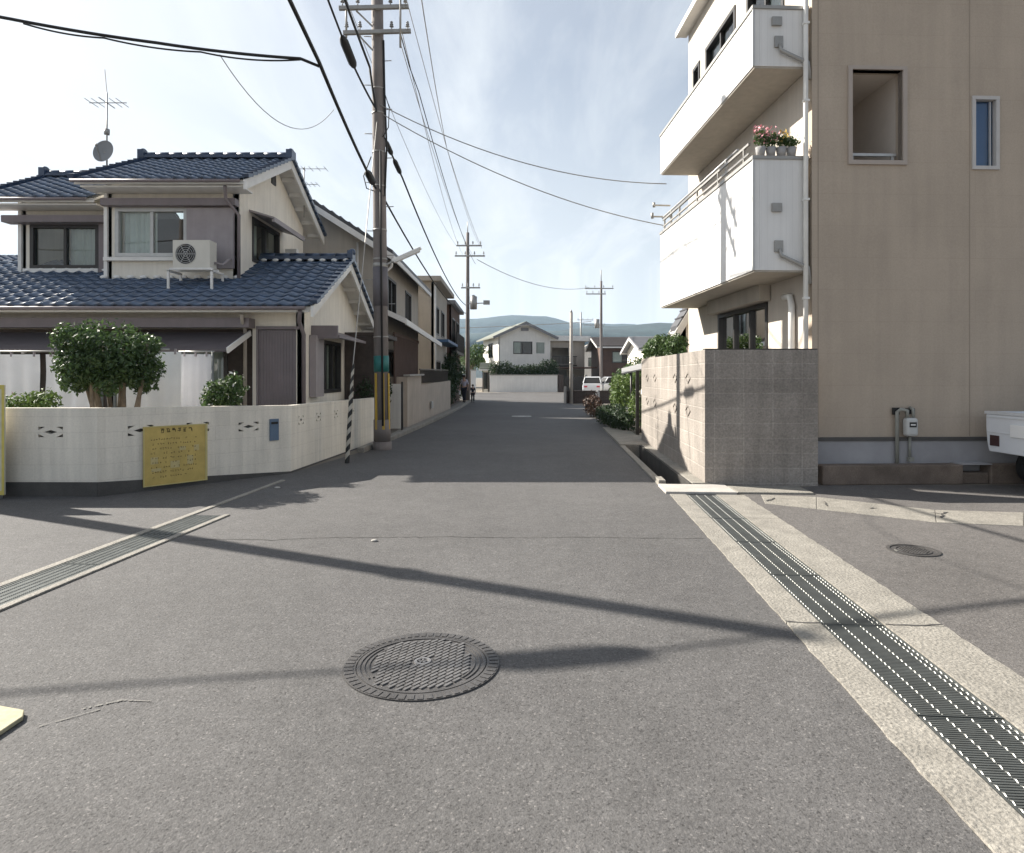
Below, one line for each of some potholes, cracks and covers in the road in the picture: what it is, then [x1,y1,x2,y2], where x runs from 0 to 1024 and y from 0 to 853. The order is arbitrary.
drain grate [919,716,1024,818]
drain grate [711,518,776,542]
drain grate [65,534,175,564]
drain grate [687,495,746,519]
manhole cover [886,544,942,557]
manhole cover [342,633,499,702]
drain grate [144,515,219,534]
drain grate [771,575,884,626]
drain grate [736,542,819,576]
drain grate [0,563,101,606]
drain grate [822,624,1004,720]
